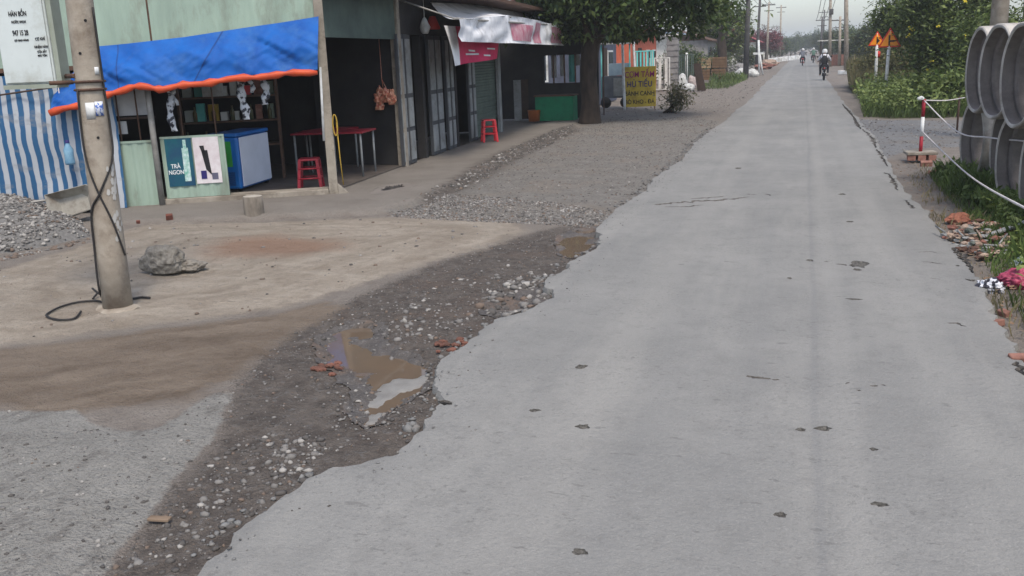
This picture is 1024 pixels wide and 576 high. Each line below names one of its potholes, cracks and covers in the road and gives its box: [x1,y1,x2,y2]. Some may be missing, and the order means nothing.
pothole [311,319,436,428]
crack [654,194,771,207]
pothole [554,226,599,259]
